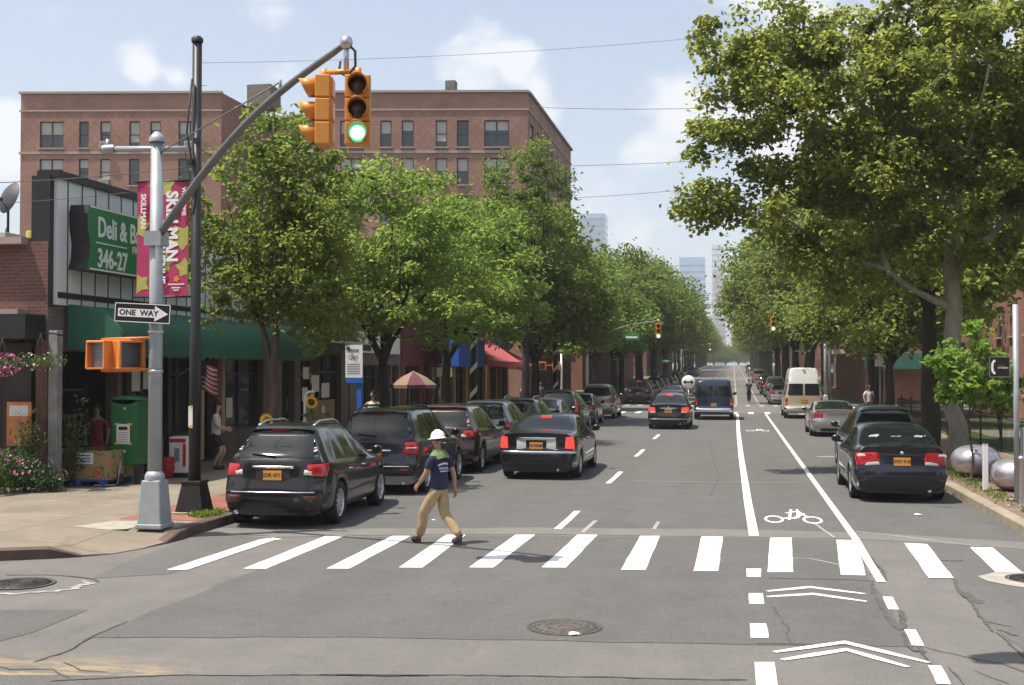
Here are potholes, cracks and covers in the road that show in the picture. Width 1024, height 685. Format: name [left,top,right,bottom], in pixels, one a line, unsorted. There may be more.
crack [772,606,790,642]
manhole cover [1004,573,1024,583]
crack [0,662,104,678]
manhole cover [527,619,602,635]
manhole cover [0,577,57,589]
crack [926,560,1024,684]
